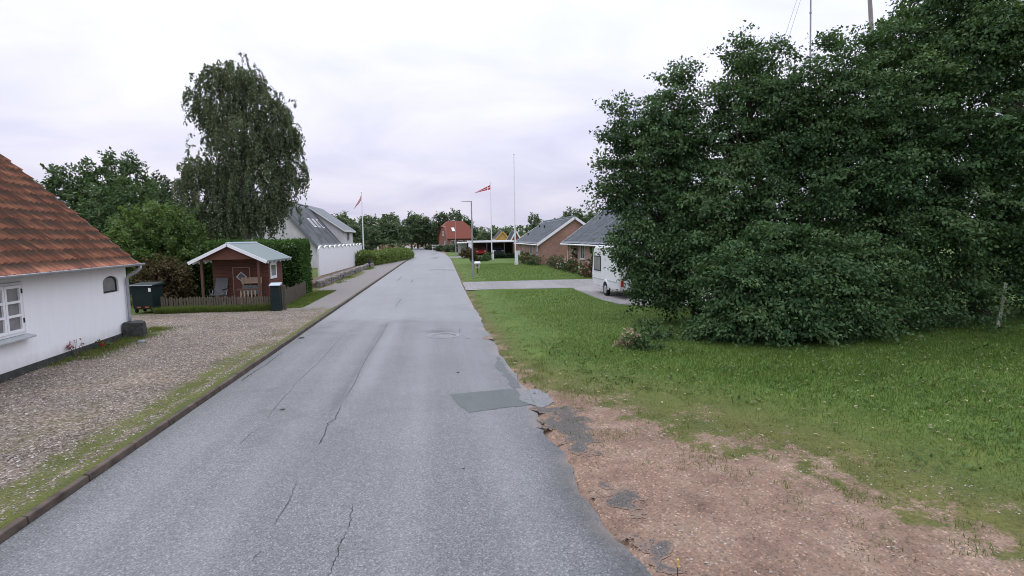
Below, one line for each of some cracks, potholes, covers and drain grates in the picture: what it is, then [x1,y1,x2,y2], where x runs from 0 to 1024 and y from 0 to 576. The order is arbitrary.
crack [328,503,353,575]
